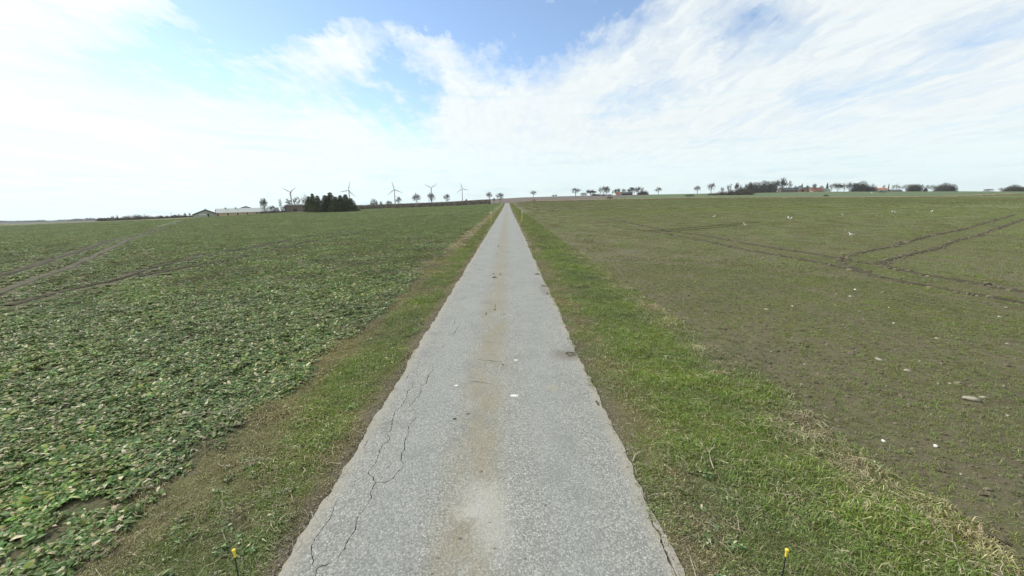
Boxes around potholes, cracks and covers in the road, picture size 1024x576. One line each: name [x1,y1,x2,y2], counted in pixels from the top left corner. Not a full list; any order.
crack [311,321,459,576]
